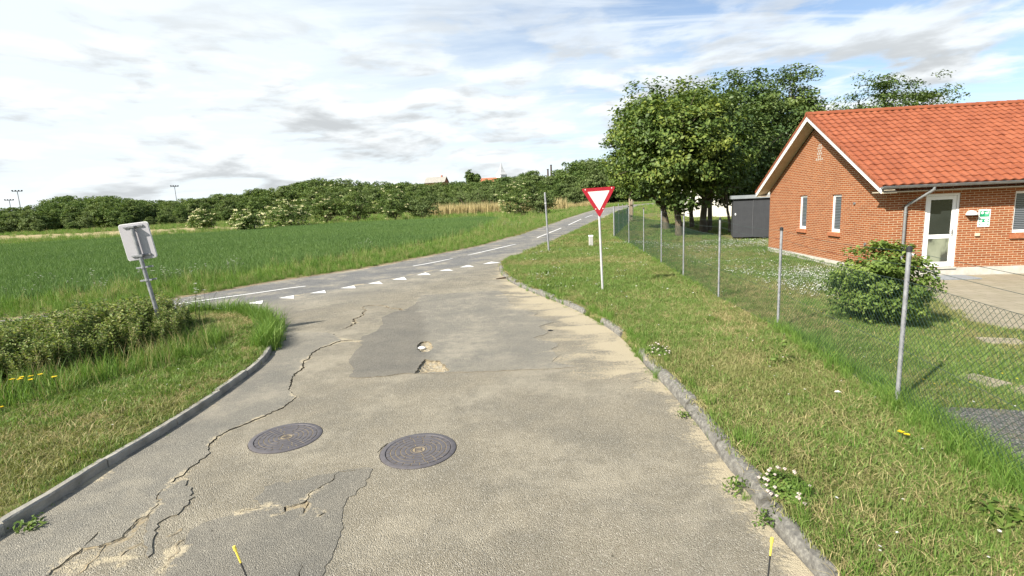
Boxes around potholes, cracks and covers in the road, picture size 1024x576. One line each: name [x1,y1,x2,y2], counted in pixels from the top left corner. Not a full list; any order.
crack [46,305,405,576]
pothole [414,359,449,374]
manhole cover [380,433,456,470]
pothole [417,341,433,352]
manhole cover [248,423,323,454]
